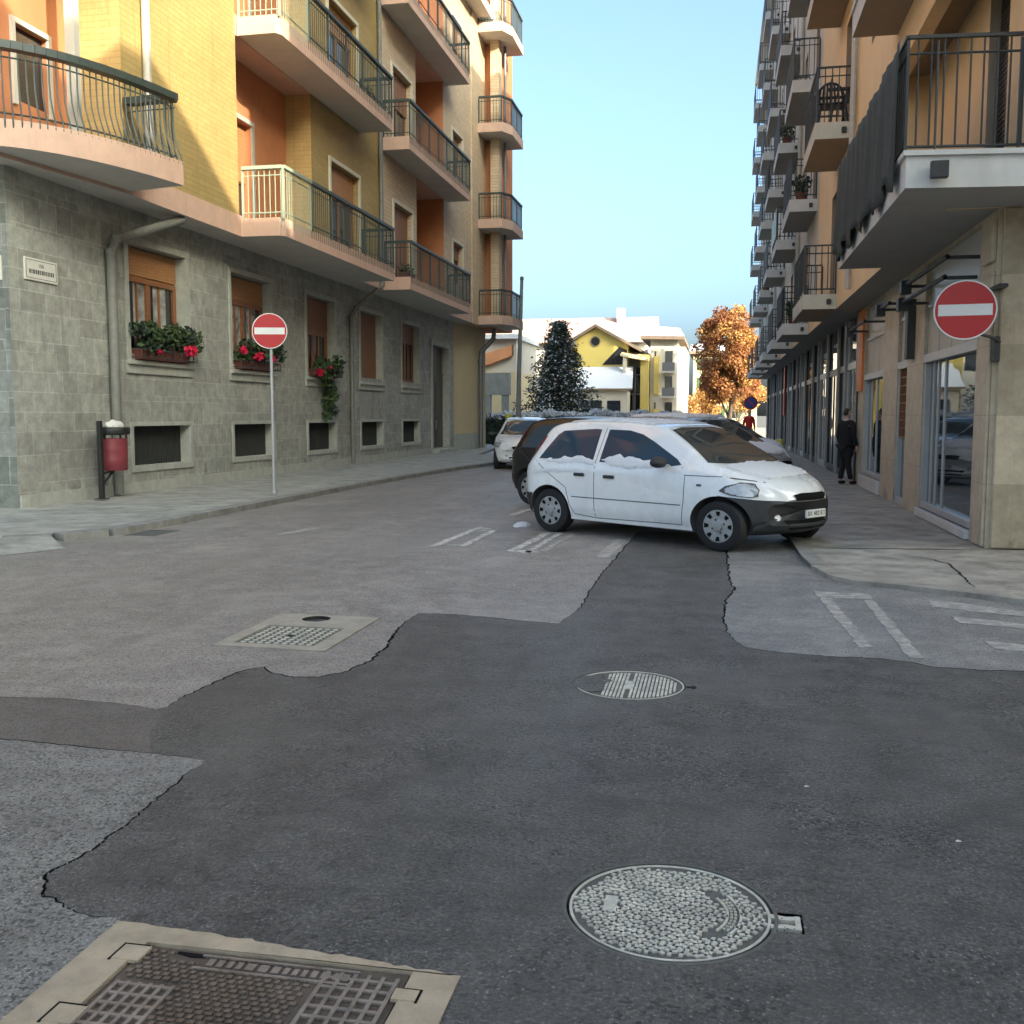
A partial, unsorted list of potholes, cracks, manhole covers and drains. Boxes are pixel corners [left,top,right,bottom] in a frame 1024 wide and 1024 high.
manhole cover [571,670,697,701]
crack [0,738,206,918]
crack [722,551,738,643]
manhole cover [562,862,803,966]
crack [854,548,978,588]
